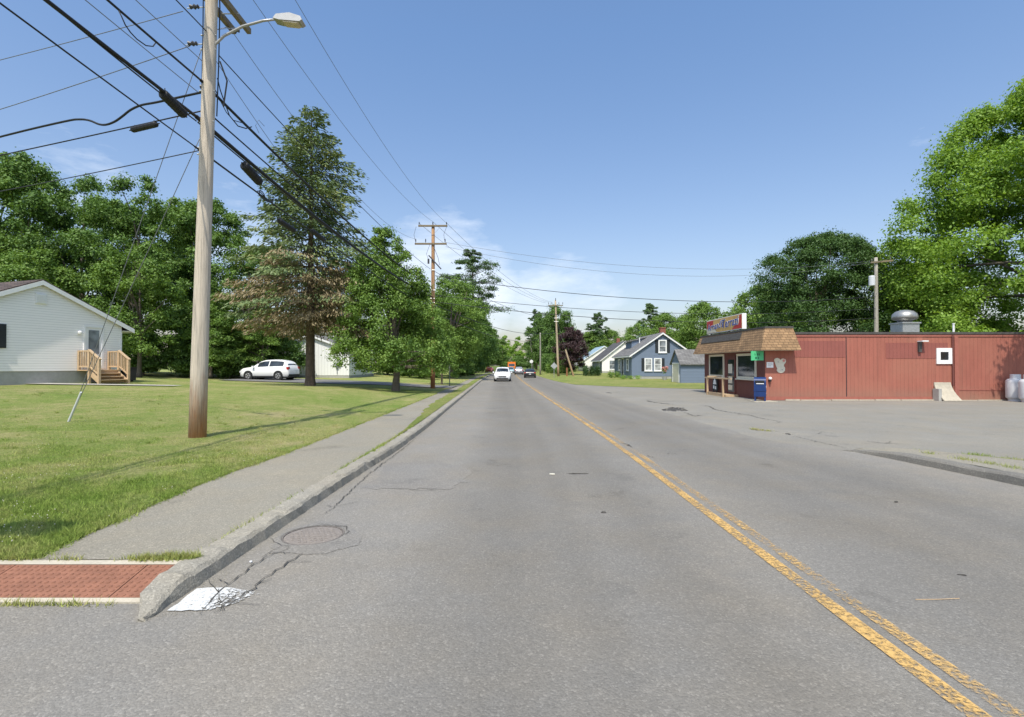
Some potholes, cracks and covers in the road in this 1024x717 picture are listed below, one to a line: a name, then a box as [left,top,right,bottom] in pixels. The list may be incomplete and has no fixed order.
manhole cover [281,526,345,545]
crack [213,540,302,611]
crack [307,438,416,522]
